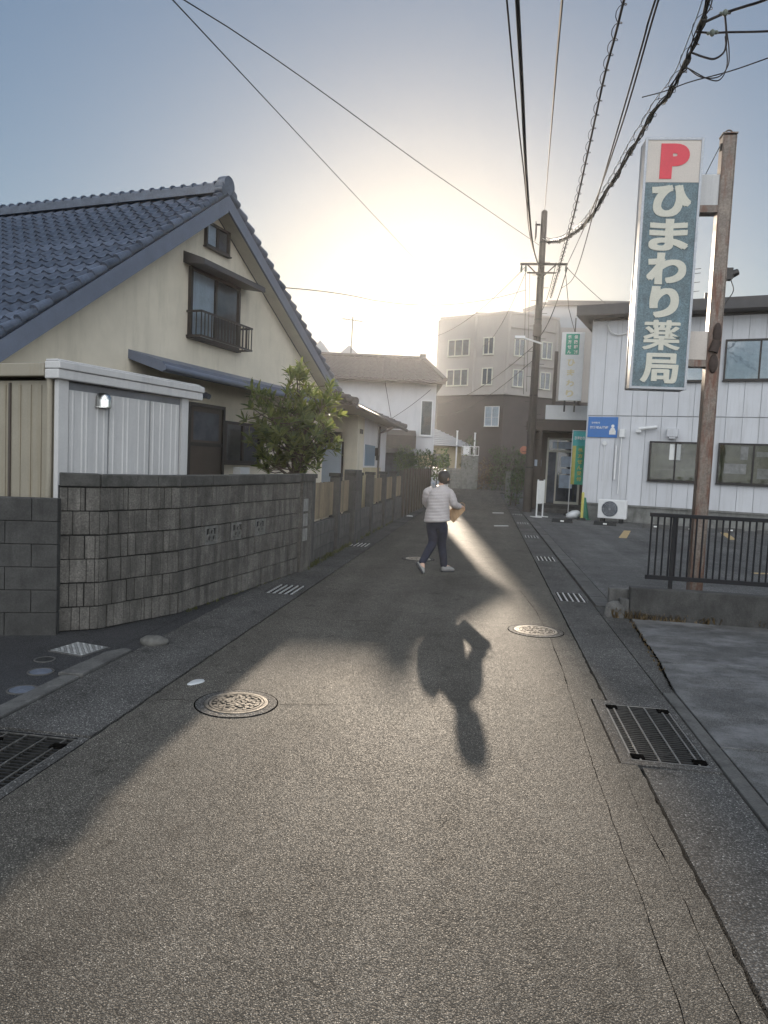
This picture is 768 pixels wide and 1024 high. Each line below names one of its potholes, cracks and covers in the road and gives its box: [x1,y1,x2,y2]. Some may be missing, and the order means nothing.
utility cover [6,685,37,695]
drain grate [264,584,307,595]
utility cover [27,667,55,676]
crack [627,780,741,1024]
manhole cover [507,624,564,638]
drain grate [0,730,78,790]
drain grate [604,703,710,767]
drain grate [554,592,588,603]
manhole cover [194,690,278,718]
